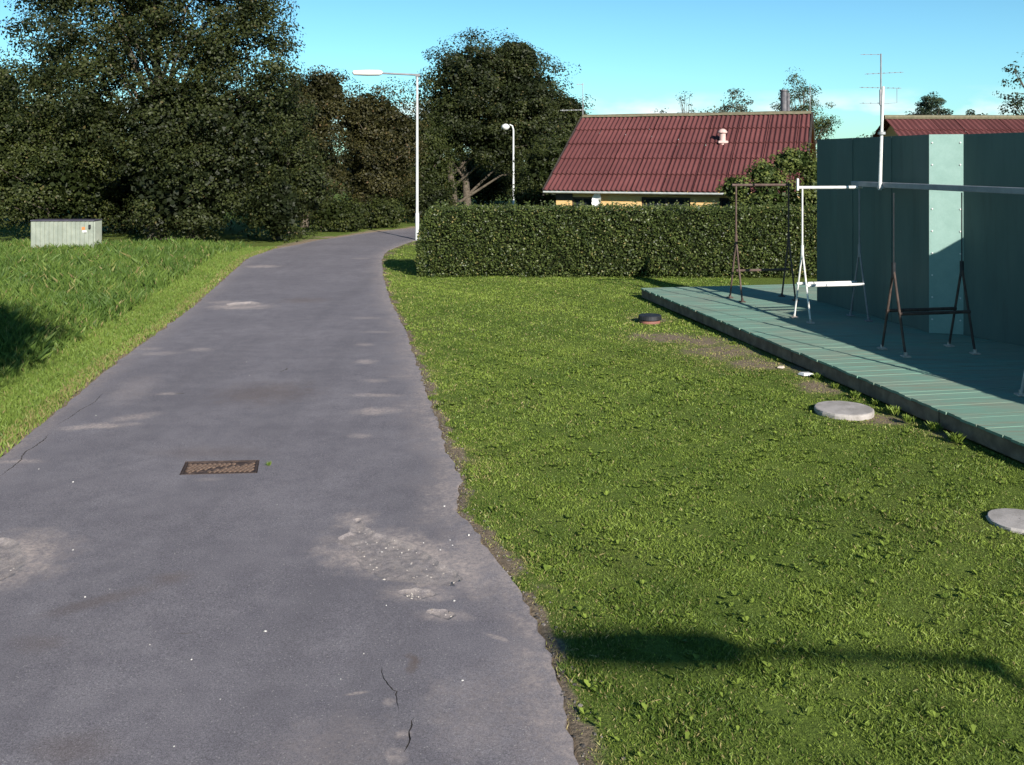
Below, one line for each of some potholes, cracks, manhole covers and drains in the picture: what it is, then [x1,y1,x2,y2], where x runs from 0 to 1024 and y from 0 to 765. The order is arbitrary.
pothole [396,588,438,600]
crack [381,670,414,750]
pothole [426,608,456,620]
pothole [338,518,463,587]
crack [0,393,103,476]
